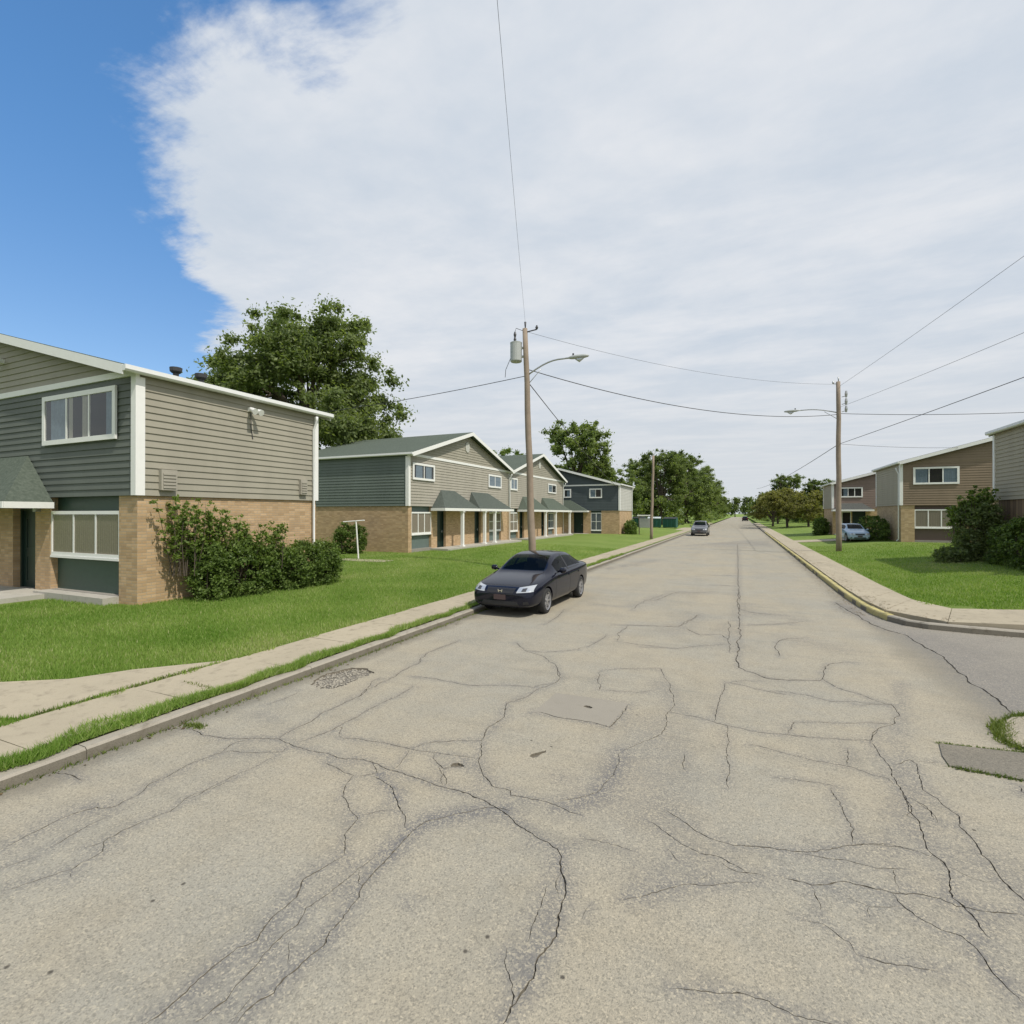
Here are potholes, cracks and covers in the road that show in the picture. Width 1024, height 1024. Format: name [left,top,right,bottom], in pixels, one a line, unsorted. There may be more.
crack [282,575,1024,1002]
crack [4,685,577,1024]
crack [671,988,831,1024]
pothole [311,668,374,689]
